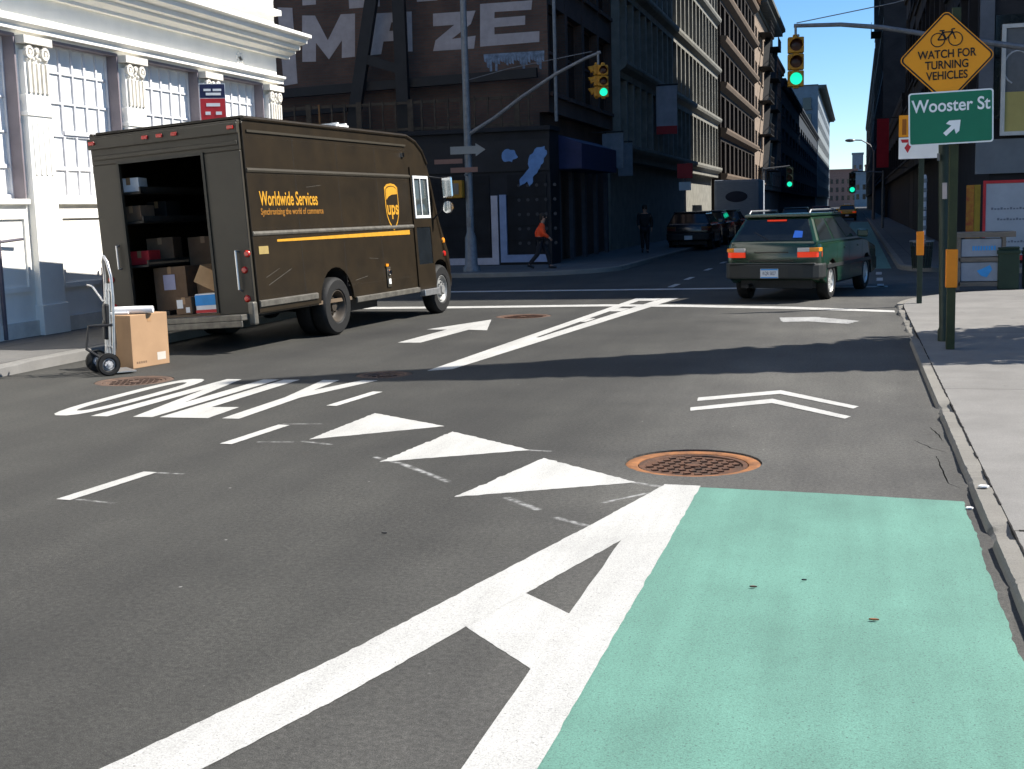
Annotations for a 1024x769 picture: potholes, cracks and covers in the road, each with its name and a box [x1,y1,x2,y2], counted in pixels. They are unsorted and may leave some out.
manhole cover [625,451,761,477]
crack [903,306,1024,554]
manhole cover [94,376,174,386]
